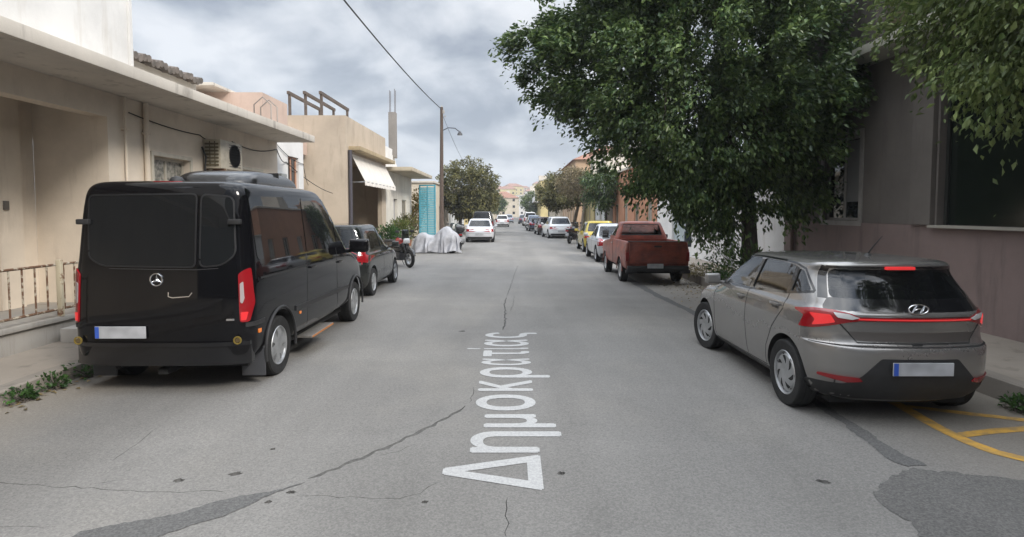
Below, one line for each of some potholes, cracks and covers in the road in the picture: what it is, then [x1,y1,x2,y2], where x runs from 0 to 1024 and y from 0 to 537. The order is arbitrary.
crack [307,389,474,499]
crack [502,271,516,330]
crack [0,479,222,493]
